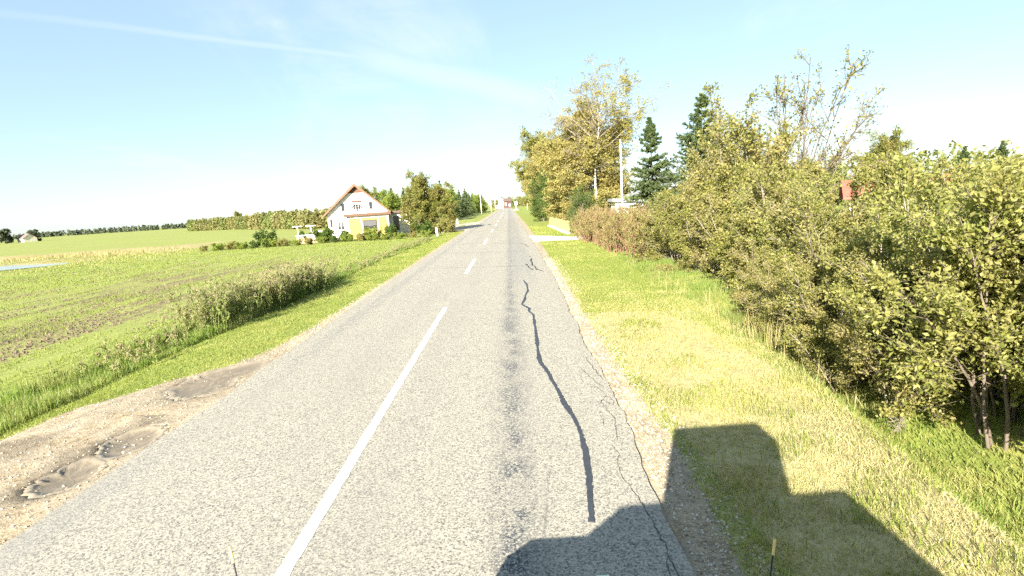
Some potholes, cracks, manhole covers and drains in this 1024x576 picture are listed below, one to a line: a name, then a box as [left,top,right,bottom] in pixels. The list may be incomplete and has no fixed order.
pothole [94,424,170,460]
crack [580,358,680,576]
pothole [163,358,273,401]
pothole [20,457,110,499]
